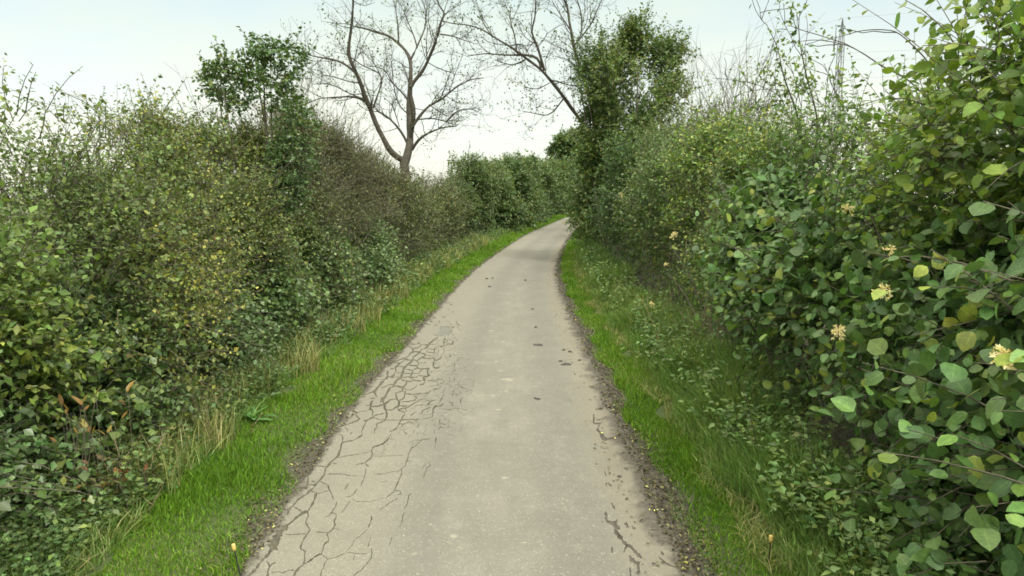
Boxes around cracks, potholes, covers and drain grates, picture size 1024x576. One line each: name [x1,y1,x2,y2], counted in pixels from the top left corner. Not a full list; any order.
crack [589,386,675,576]
crack [247,304,476,576]
